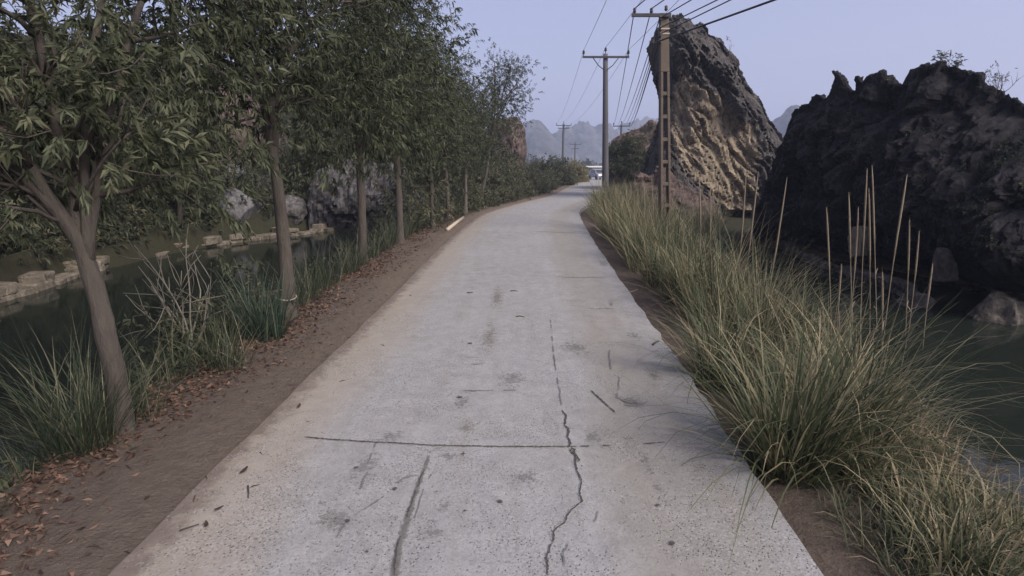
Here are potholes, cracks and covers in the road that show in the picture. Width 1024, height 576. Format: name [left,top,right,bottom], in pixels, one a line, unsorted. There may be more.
crack [608,349,648,406]
crack [336,443,434,575]
crack [543,319,598,574]
